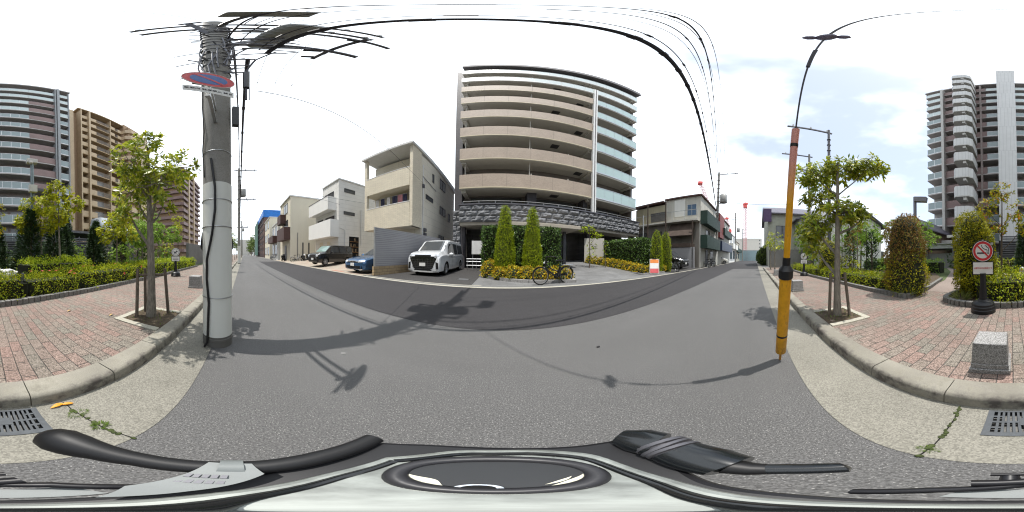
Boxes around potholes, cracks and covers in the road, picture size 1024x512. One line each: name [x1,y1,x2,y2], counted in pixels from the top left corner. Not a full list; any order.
drain grate [0,407,1024,436]
